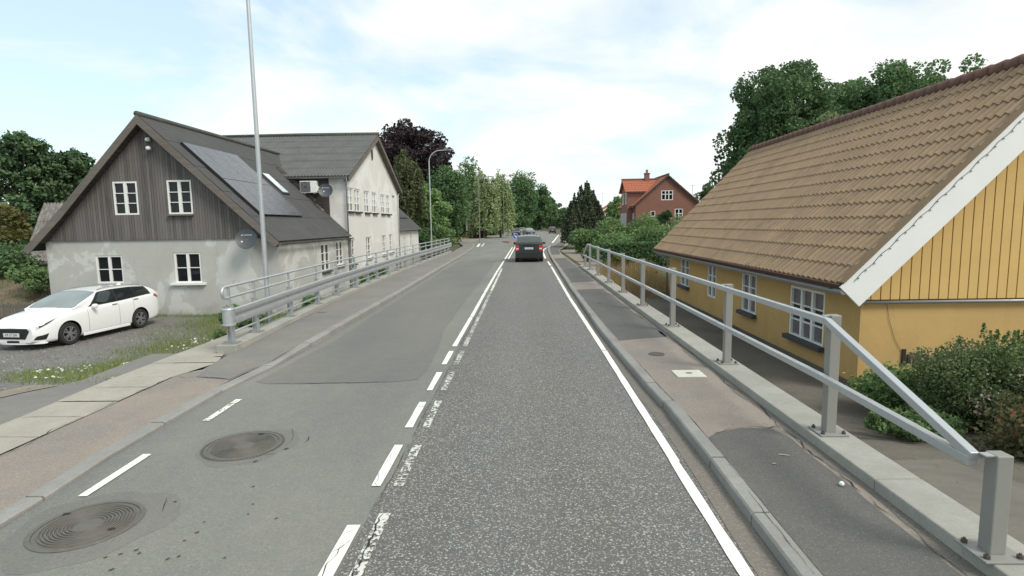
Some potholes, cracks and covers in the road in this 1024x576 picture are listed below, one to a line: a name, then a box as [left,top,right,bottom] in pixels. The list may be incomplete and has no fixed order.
manhole cover [0,492,180,575]
utility cover [671,370,707,378]
manhole cover [195,429,300,468]
